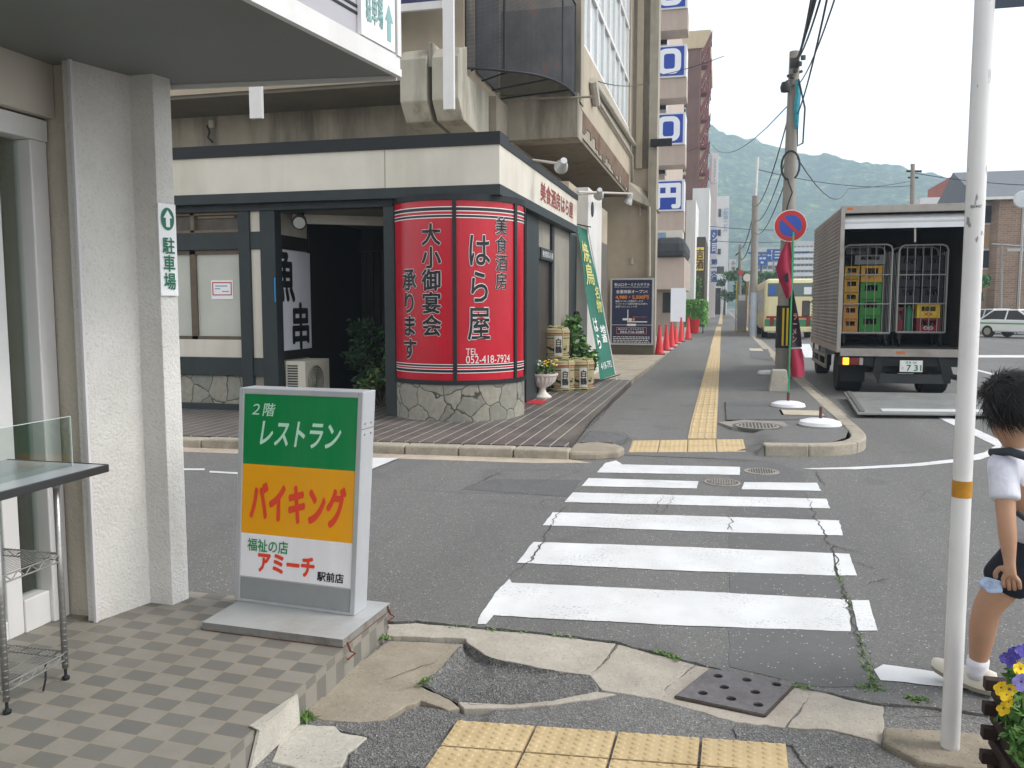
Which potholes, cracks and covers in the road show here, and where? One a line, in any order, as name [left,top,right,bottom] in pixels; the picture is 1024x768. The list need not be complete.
manhole cover [733,422,783,431]
pothole [422,644,601,705]
manhole cover [704,478,741,487]
